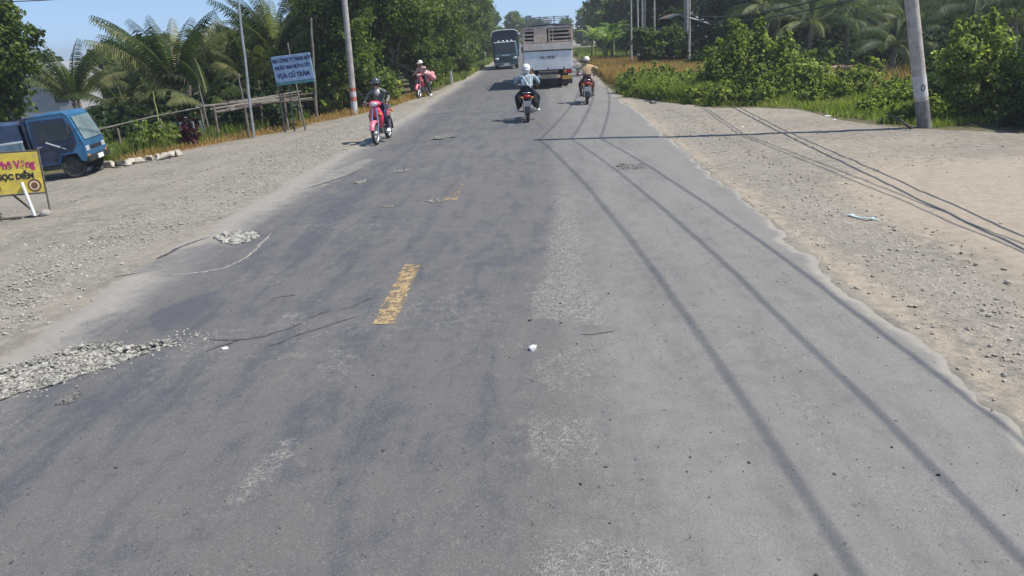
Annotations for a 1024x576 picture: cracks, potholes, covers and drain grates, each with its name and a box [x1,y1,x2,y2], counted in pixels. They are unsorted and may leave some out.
pothole [54,391,81,405]
pothole [0,322,234,401]
crack [207,298,372,351]
crack [115,233,271,276]
pothole [213,230,261,245]
